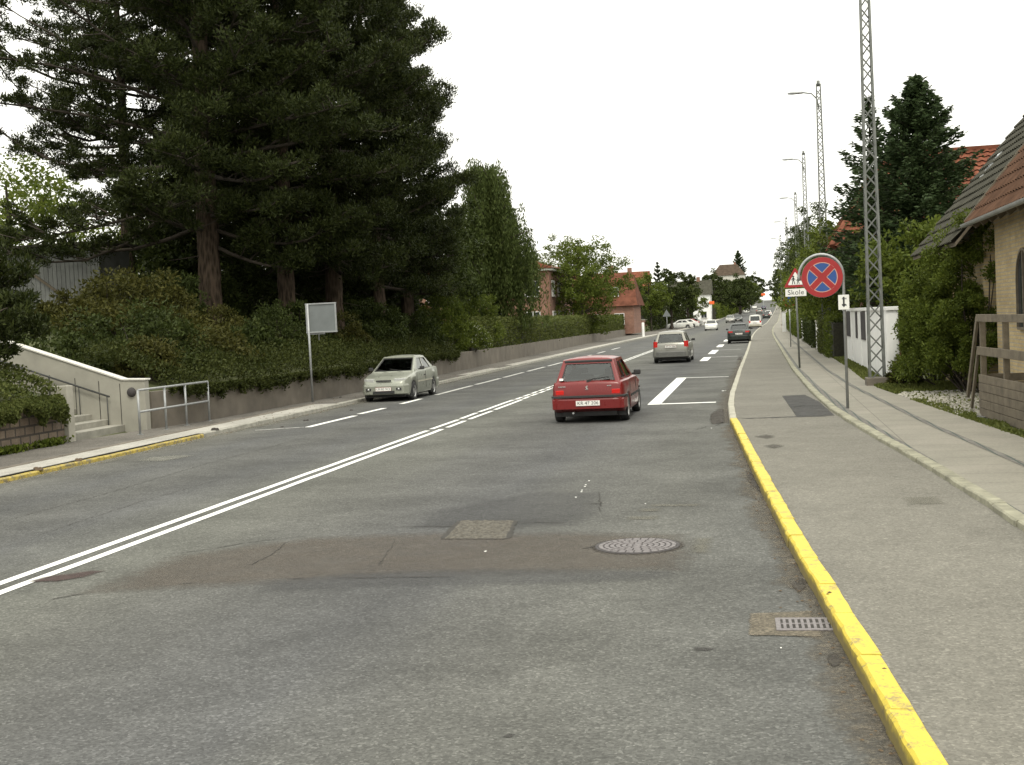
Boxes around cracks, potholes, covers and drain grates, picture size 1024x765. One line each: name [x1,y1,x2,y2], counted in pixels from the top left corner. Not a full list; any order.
crack [164,535,314,564]
crack [340,526,451,578]
manhole cover [595,538,680,554]
drain grate [775,617,833,632]
